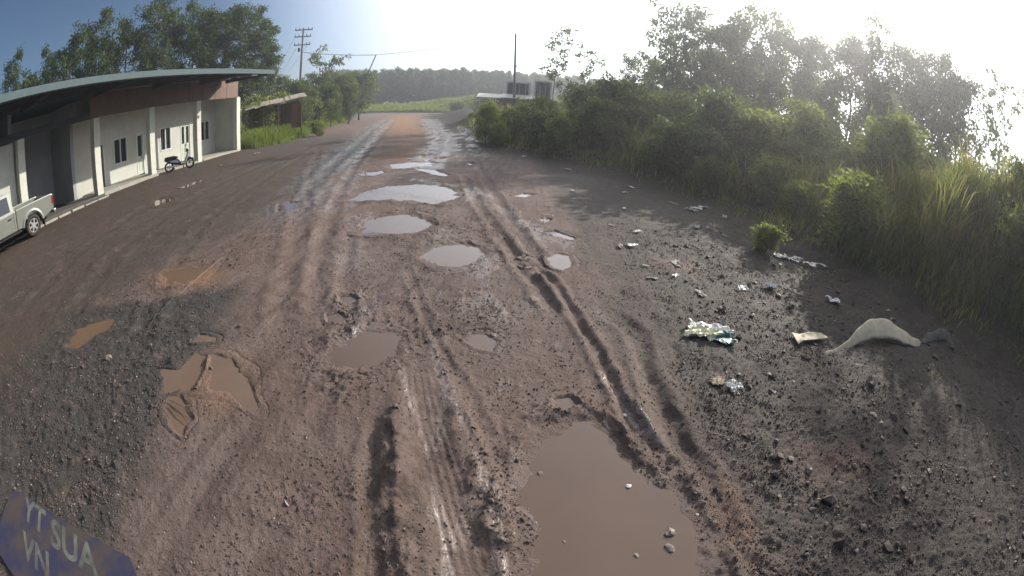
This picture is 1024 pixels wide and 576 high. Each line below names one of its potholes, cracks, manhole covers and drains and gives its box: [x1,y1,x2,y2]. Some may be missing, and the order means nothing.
pothole [538,251,581,274]
pothole [376,160,446,171]
pothole [459,329,507,356]
pothole [196,348,269,422]
pothole [401,237,507,275]
pothole [156,390,199,443]
pothole [303,320,422,381]
pothole [536,229,582,242]
pothole [147,345,212,400]
pothole [341,209,451,241]
pothole [458,388,765,576]
pothole [151,260,222,291]
